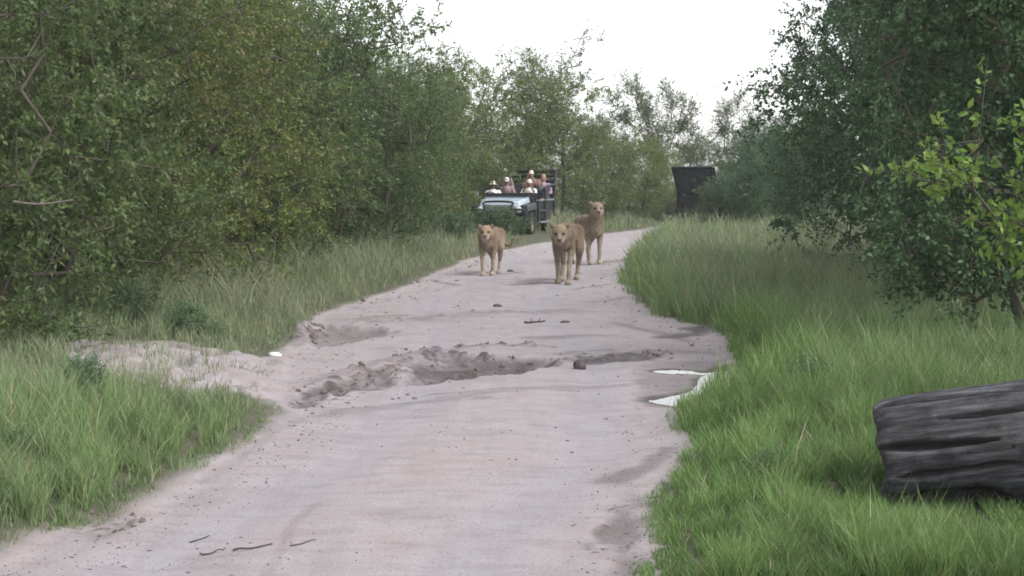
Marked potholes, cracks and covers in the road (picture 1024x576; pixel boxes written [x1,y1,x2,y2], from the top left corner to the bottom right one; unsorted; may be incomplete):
pothole [400,351,561,386]
pothole [627,359,738,409]
pothole [563,350,666,365]
pothole [297,324,400,347]
pothole [283,363,397,409]
